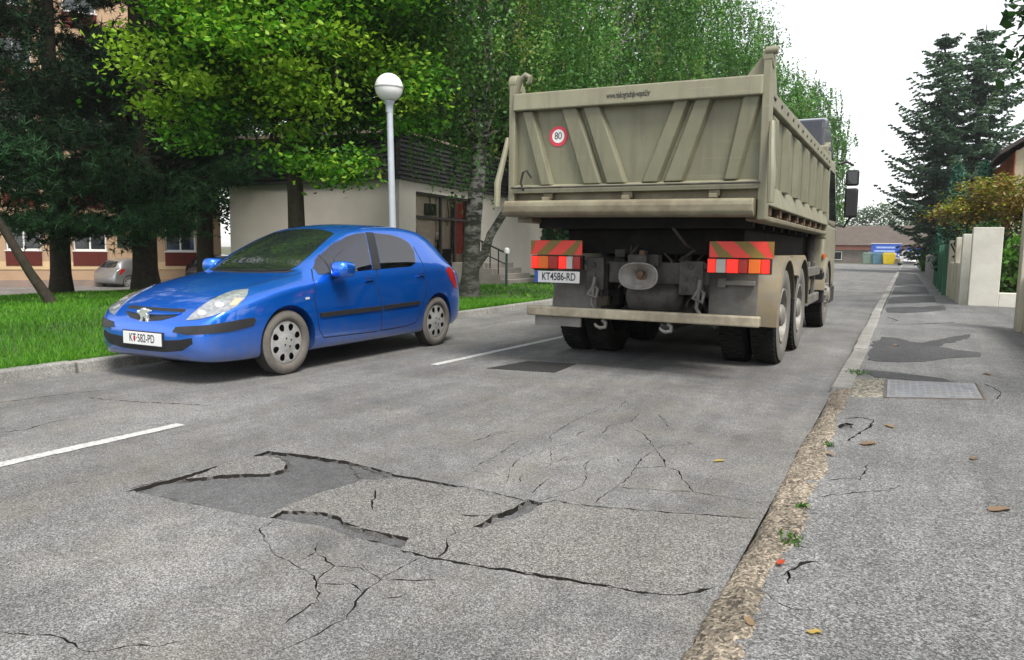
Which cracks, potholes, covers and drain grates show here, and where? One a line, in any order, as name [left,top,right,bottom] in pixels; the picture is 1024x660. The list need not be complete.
crack [438,392,761,557]
pothole [125,451,388,517]
crack [846,417,874,441]
crack [821,466,901,497]
manhole cover [883,379,986,400]
crack [259,522,431,654]
crack [3,632,190,652]
pothole [270,511,409,548]
